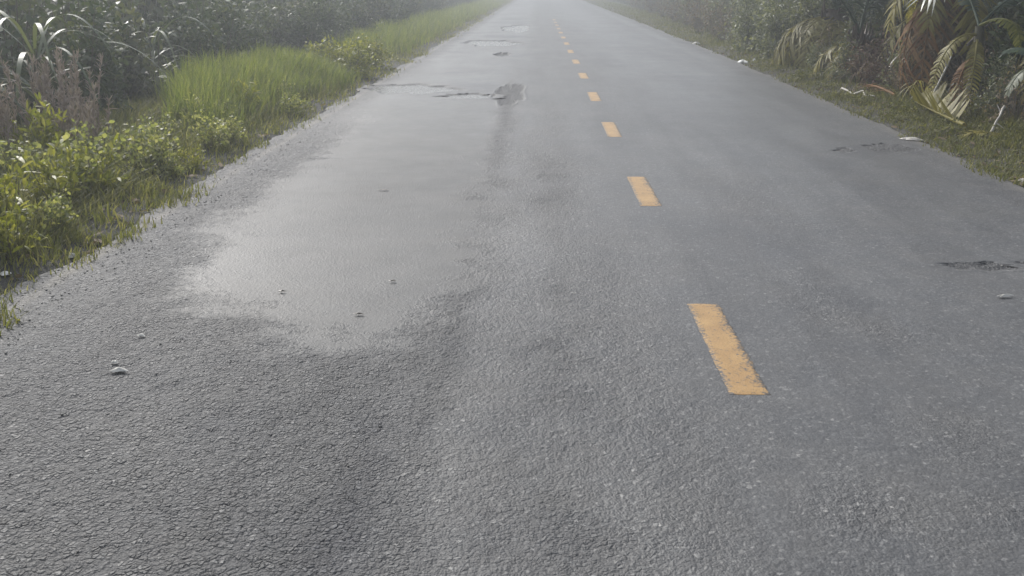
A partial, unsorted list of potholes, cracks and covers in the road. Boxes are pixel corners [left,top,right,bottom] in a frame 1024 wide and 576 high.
pothole [927,260,1024,273]
pothole [487,82,528,109]
pothole [855,142,929,155]
